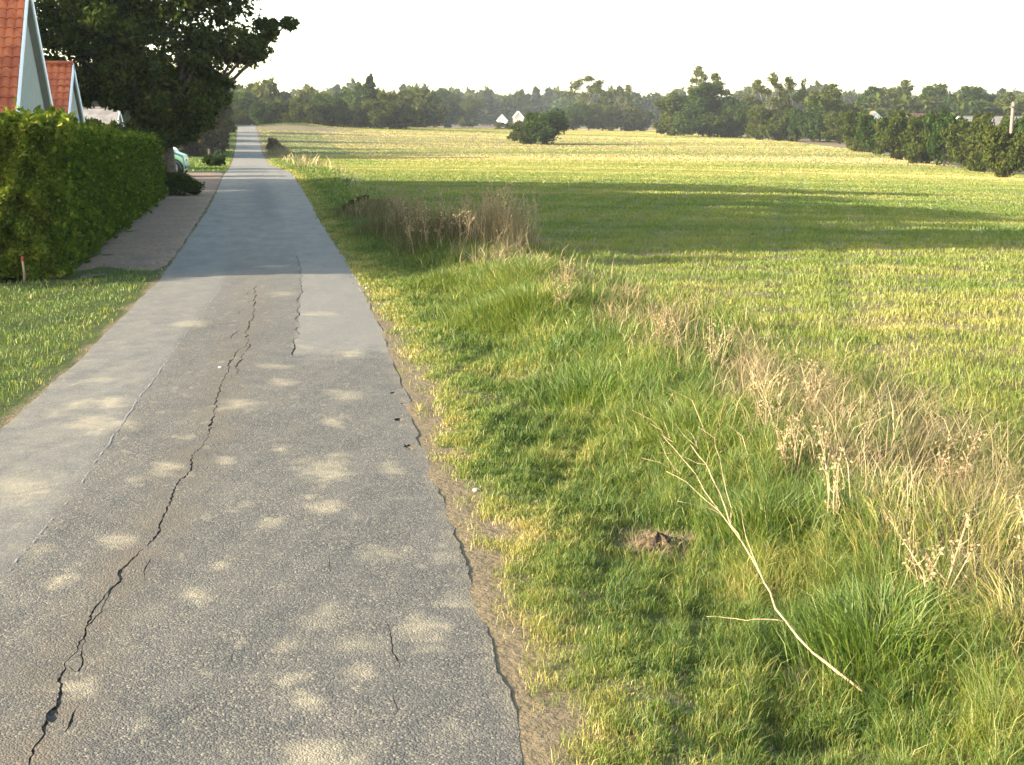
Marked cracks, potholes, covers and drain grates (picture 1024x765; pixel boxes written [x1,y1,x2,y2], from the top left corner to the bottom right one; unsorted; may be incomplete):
crack [28,285,260,765]
crack [291,256,303,357]
crack [386,621,401,666]
